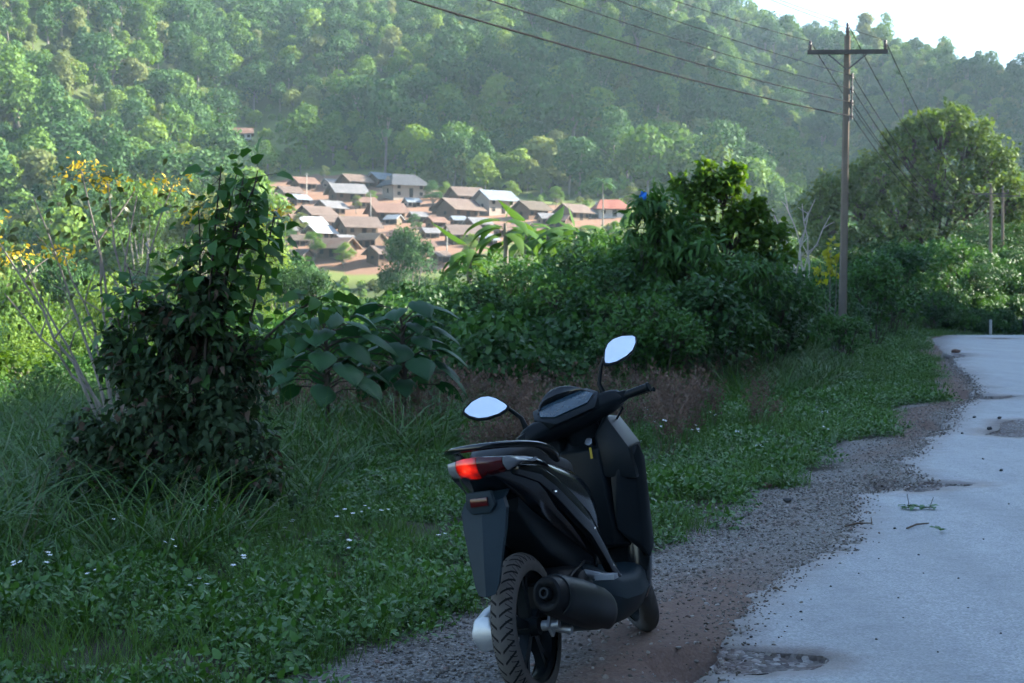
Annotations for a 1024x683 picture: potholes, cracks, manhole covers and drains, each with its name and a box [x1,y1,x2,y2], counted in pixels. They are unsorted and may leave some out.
pothole [713,647,829,675]
pothole [986,420,1024,438]
